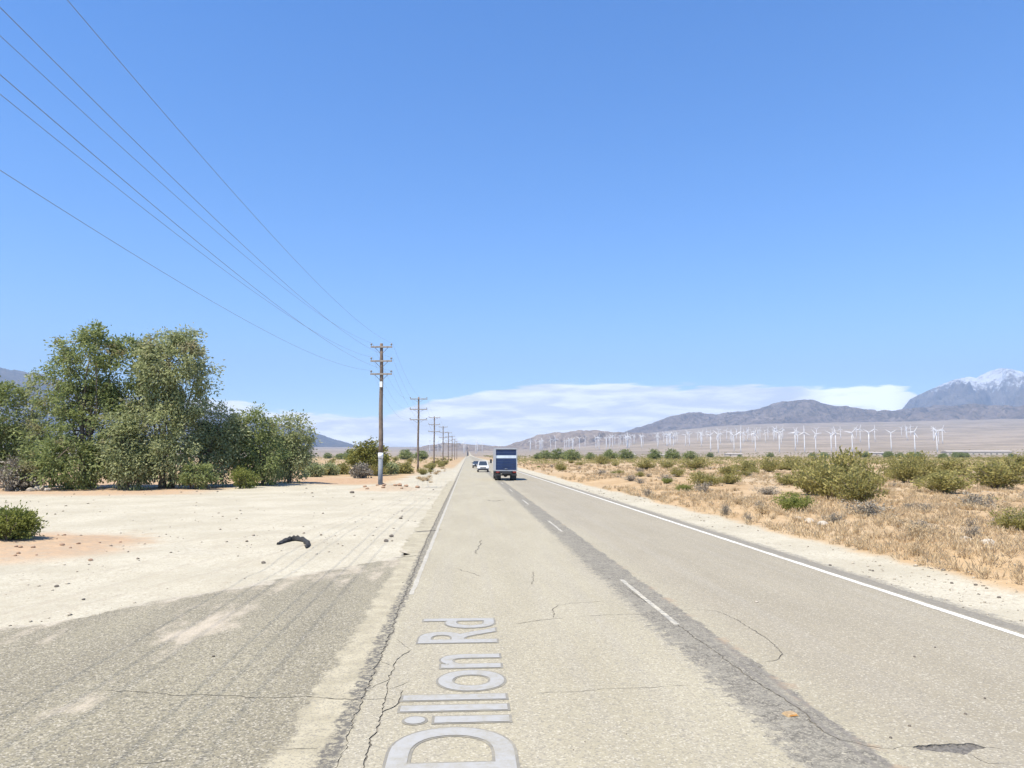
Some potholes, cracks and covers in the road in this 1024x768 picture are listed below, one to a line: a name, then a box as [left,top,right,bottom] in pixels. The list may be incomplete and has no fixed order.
crack [627,588,906,749]
pothole [913,743,986,755]
